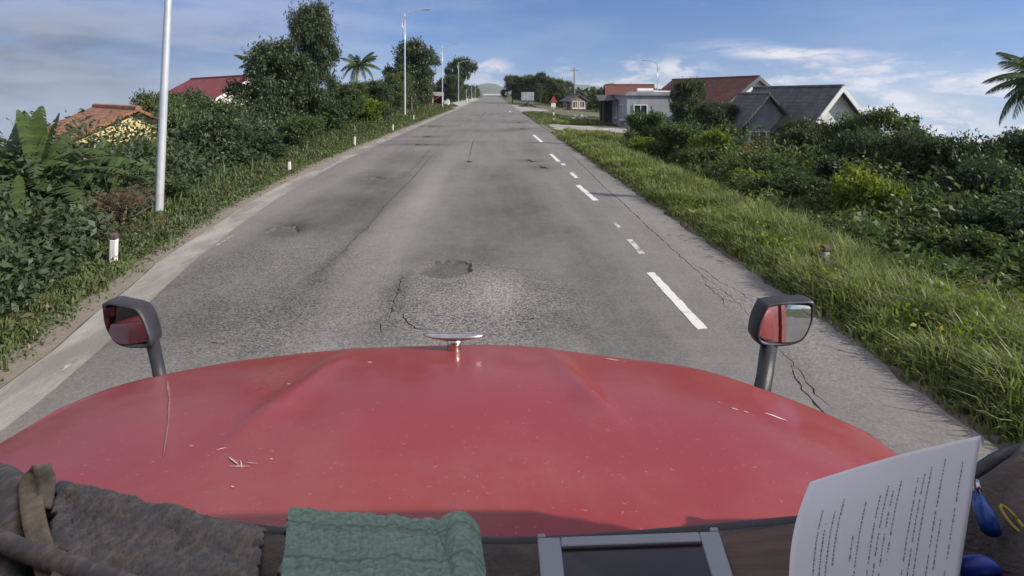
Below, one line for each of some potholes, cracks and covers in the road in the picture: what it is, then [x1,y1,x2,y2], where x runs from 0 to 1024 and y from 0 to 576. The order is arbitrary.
pothole [418,260,473,279]
pothole [265,226,300,237]
crack [779,350,832,413]
crack [331,149,432,262]
crack [380,274,438,333]
